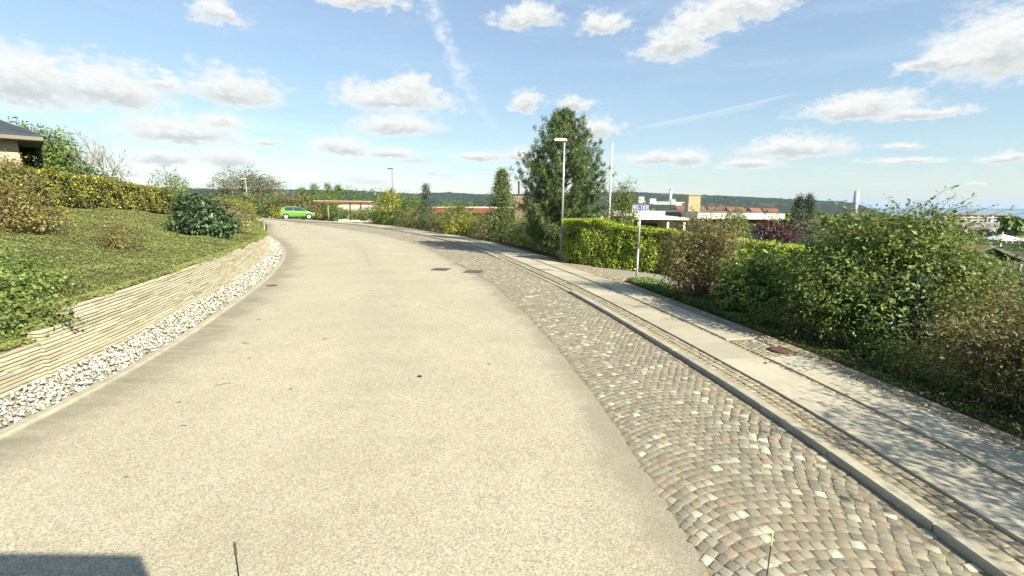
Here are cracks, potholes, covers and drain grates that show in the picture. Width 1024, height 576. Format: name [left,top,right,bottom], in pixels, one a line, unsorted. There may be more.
manhole cover [768,346,792,354]
